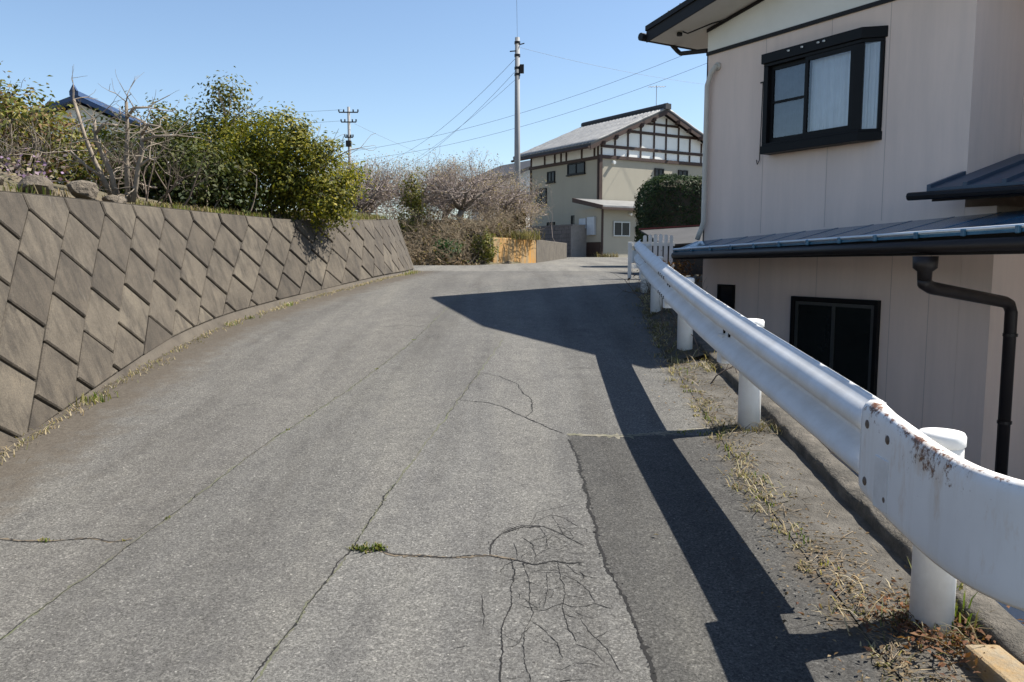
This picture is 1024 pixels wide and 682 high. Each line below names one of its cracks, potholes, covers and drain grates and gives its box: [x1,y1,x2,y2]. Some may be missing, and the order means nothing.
crack [345,374,657,682]
